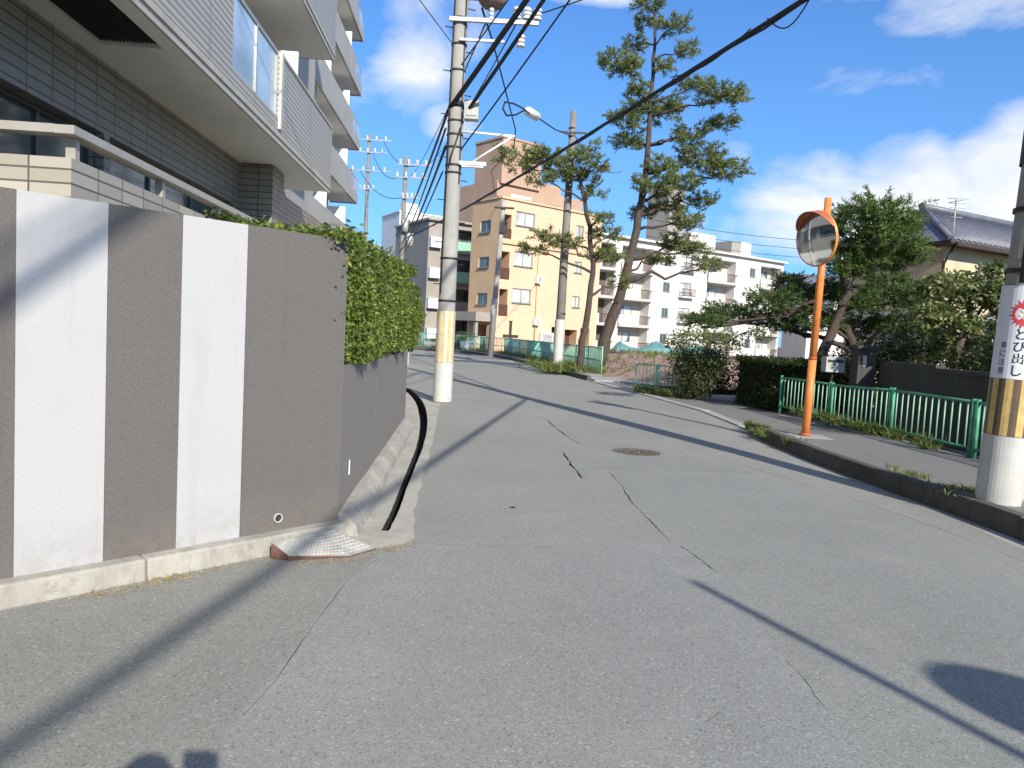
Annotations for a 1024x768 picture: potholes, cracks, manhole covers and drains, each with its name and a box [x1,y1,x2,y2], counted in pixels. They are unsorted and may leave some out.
manhole cover [612,448,661,456]
crack [540,417,582,478]
crack [607,468,715,571]
